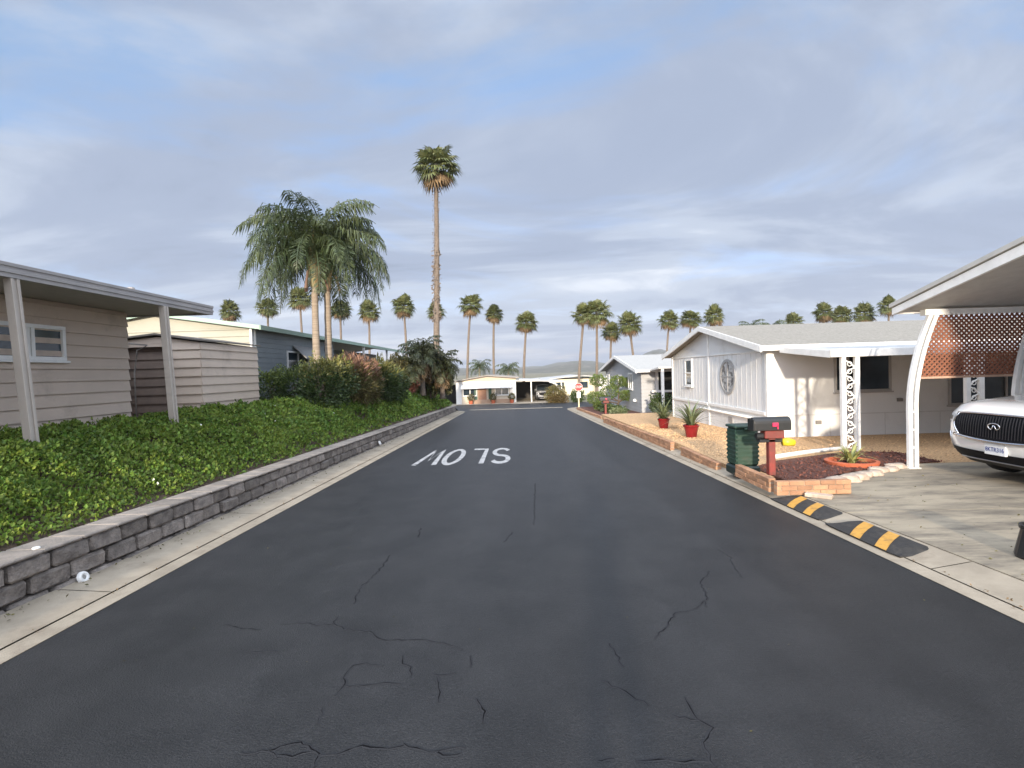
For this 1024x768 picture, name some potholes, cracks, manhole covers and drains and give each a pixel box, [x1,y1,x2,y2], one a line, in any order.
crack [653,549,742,640]
crack [636,696,718,767]
crack [600,643,650,706]
crack [475,698,488,723]
crack [223,555,473,767]
